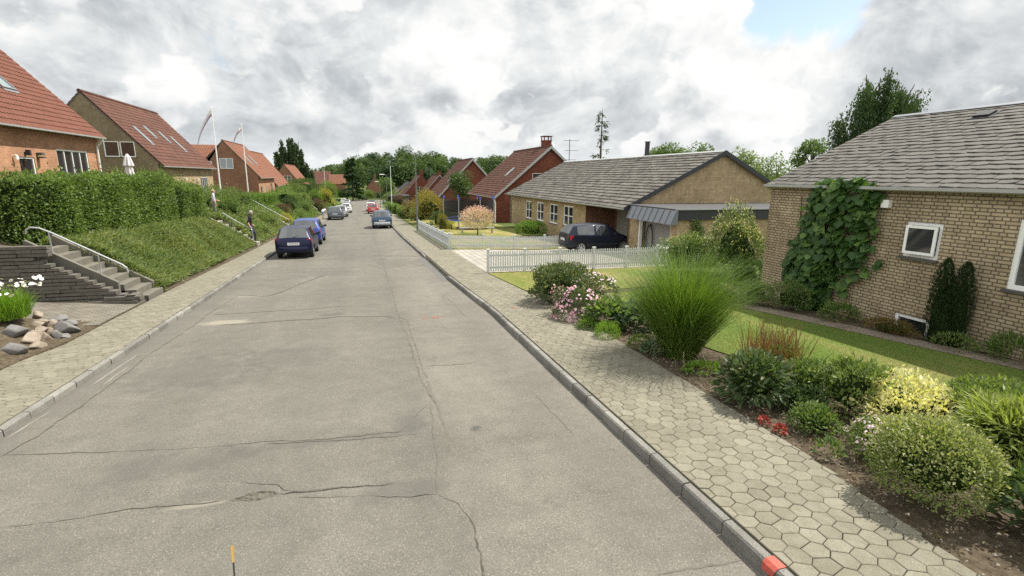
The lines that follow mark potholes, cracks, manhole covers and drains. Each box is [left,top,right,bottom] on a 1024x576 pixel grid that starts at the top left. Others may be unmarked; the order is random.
crack [8,233,485,576]
pothole [229,491,278,502]
